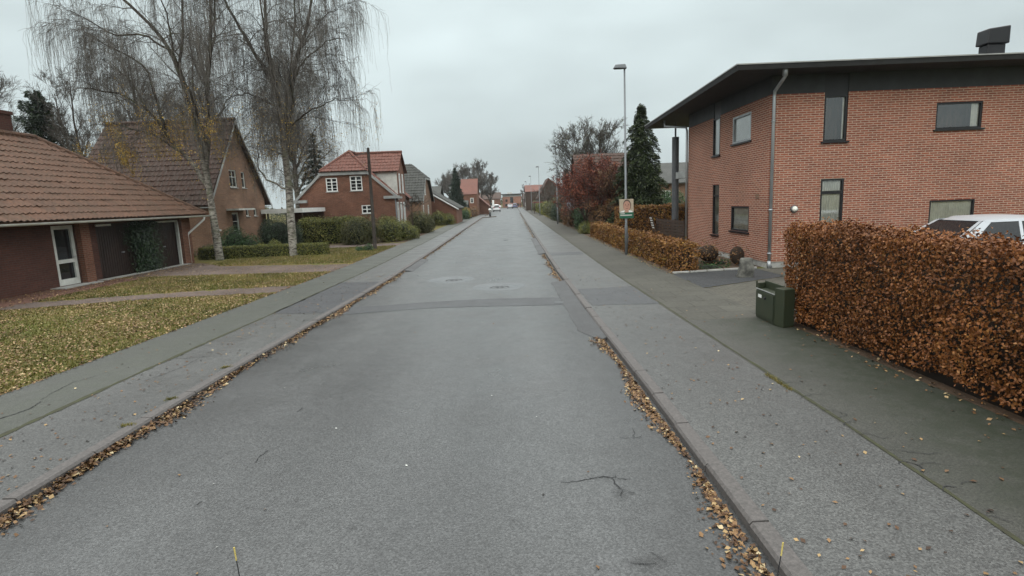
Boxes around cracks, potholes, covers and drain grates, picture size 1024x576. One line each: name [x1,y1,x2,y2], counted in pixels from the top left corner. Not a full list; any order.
crack [561,476,636,495]
